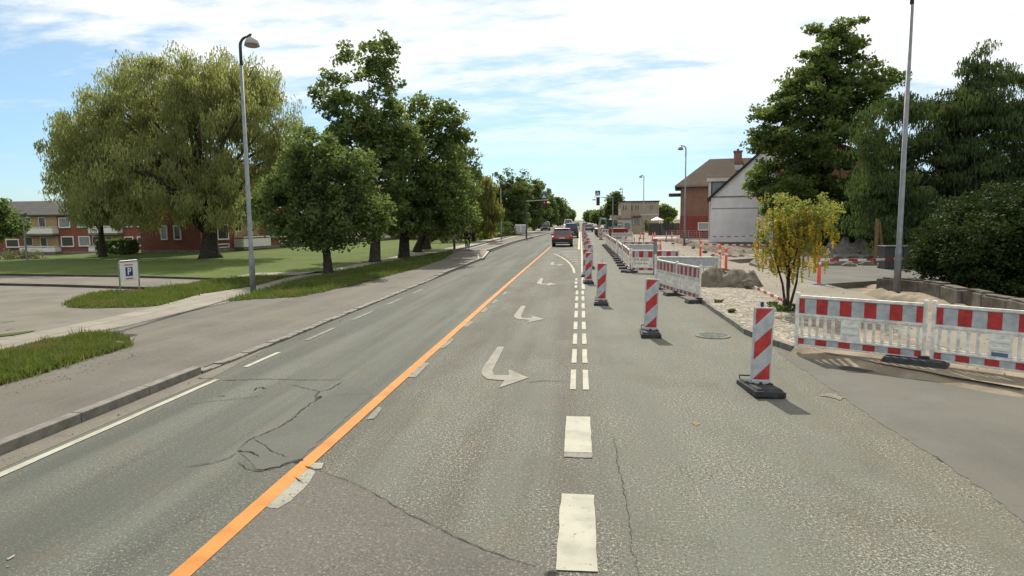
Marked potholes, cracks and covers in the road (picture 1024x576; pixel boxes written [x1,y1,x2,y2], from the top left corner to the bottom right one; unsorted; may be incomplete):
crack [613,438,640,575]
crack [182,377,343,482]
